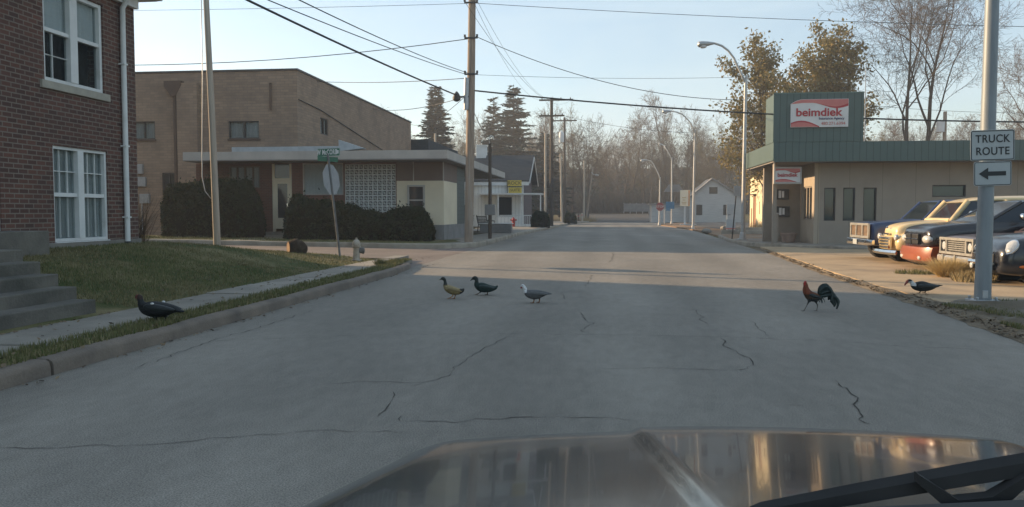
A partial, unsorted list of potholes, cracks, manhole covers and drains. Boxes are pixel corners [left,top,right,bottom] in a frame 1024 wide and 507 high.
crack [838,382,870,424]
crack [3,336,625,449]
